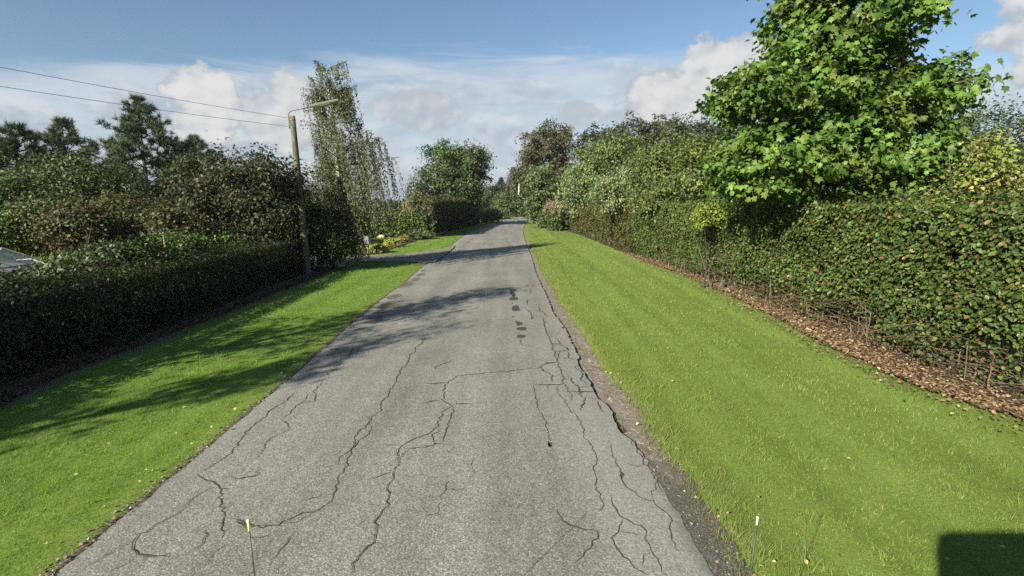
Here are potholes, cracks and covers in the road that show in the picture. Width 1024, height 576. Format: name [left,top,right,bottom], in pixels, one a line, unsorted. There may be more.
crack [350,368,530,572]
crack [526,284,685,576]
crack [88,338,425,574]
